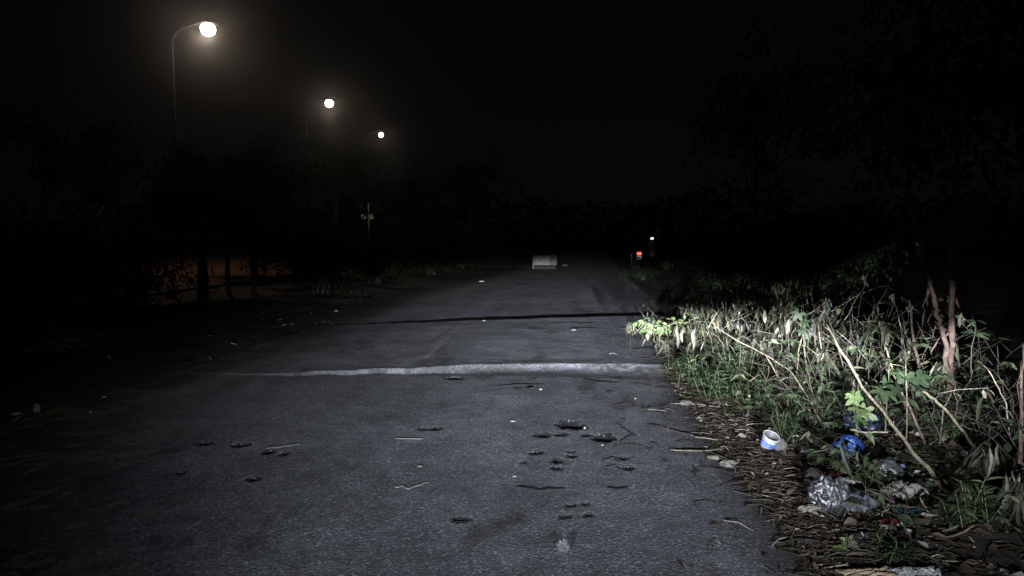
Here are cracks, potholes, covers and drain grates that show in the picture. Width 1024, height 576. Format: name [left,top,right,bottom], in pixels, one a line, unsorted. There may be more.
crack [602,423,635,490]
crack [394,482,428,490]
pothole [555,419,588,430]
pothole [590,433,617,443]
